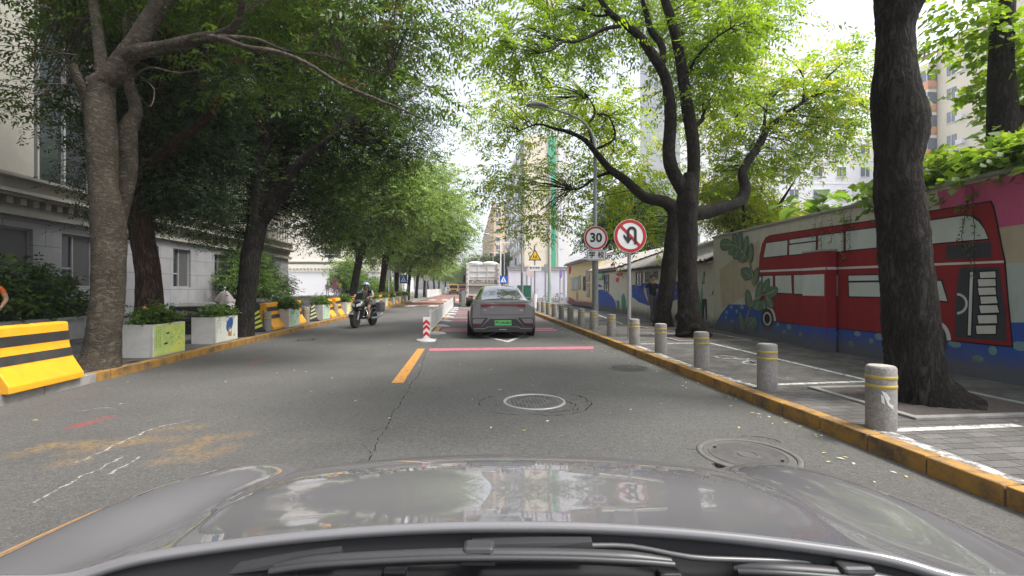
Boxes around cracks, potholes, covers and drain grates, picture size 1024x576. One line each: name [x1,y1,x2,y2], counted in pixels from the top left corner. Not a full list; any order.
crack [360,334,443,461]
manhole cover [697,438,805,468]
manhole cover [608,364,651,372]
manhole cover [503,394,566,410]
